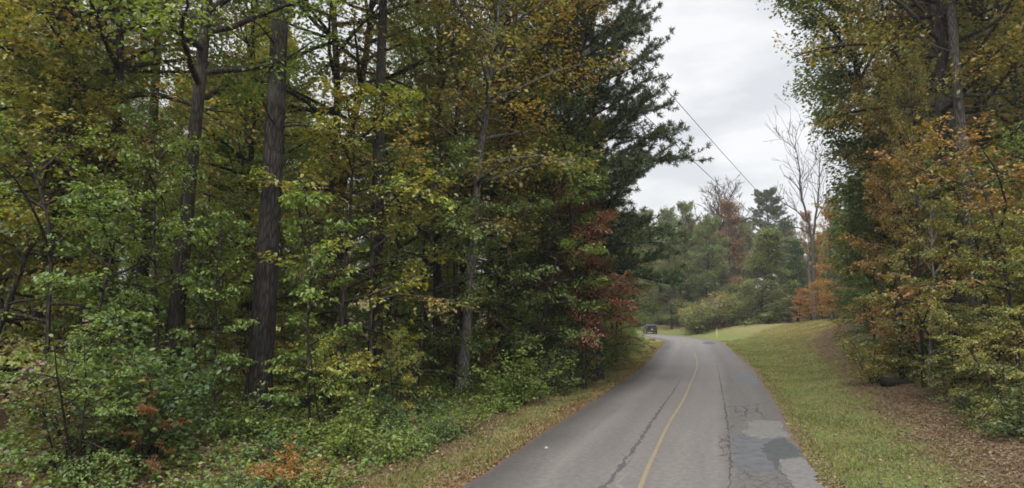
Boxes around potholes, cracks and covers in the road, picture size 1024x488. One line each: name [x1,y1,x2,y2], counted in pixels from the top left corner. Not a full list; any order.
crack [716,360,791,488]
crack [598,381,679,488]
